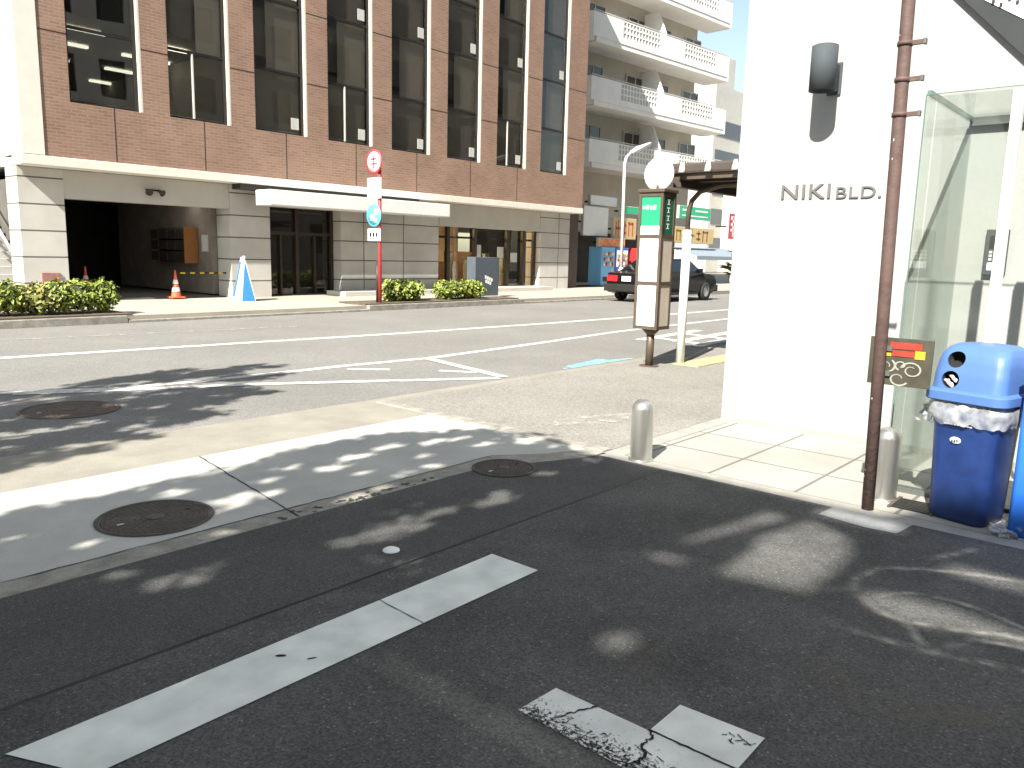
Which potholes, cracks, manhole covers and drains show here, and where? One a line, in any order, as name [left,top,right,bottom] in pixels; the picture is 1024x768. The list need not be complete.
drain grate [887,496,934,516]
manhole cover [16,400,121,419]
manhole cover [93,499,214,537]
manhole cover [472,459,536,477]
